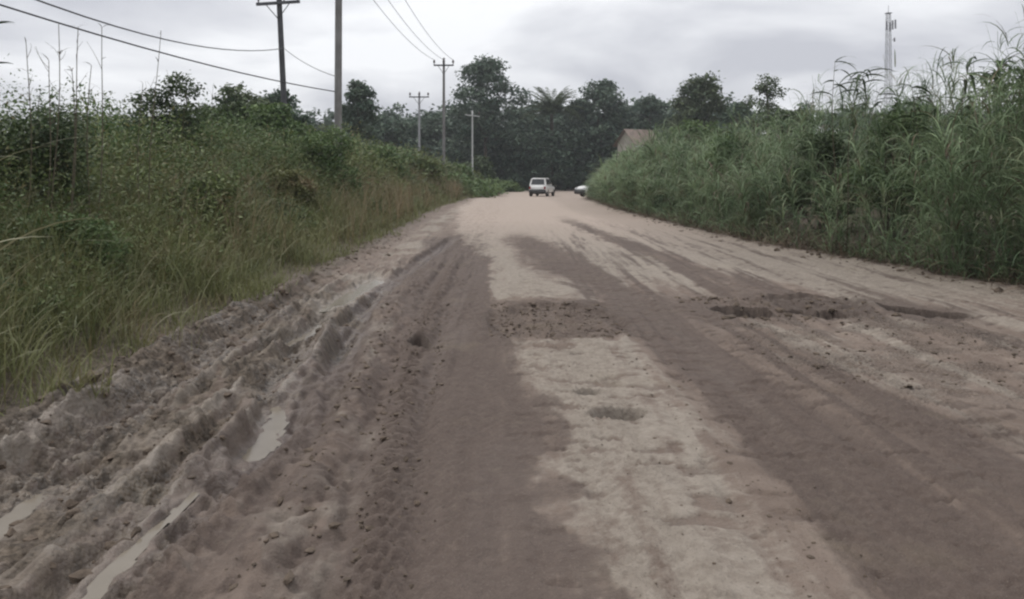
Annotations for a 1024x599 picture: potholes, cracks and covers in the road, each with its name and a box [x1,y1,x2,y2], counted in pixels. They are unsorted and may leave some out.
pothole [406,330,434,349]
pothole [581,404,653,422]
pothole [873,301,975,322]
pothole [707,305,778,319]
pothole [480,299,633,342]
pothole [756,292,875,320]
